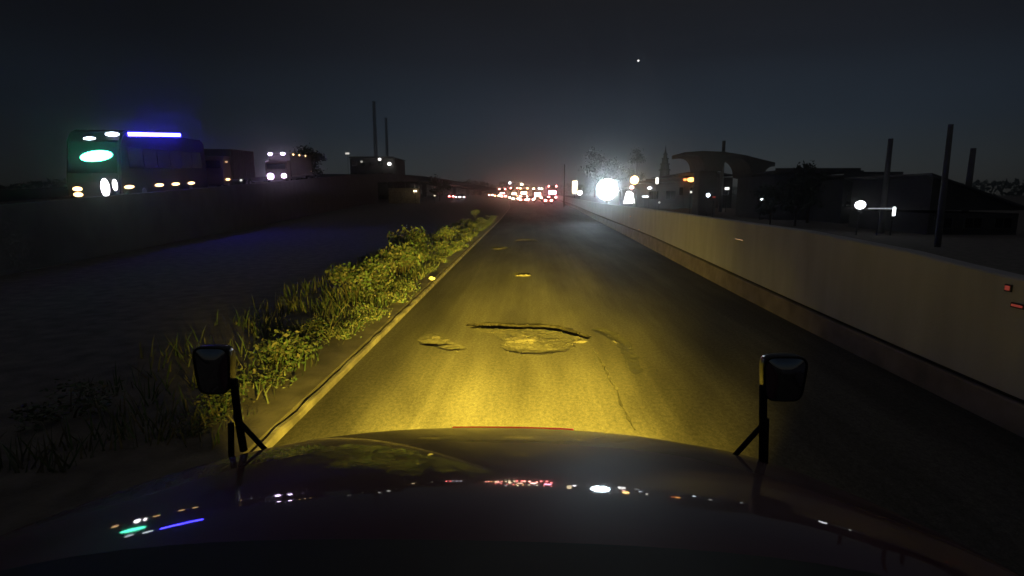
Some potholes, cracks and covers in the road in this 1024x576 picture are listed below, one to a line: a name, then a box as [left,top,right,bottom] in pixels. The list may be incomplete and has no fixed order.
pothole [417,333,467,352]
crack [593,349,636,430]
pothole [466,322,593,356]
